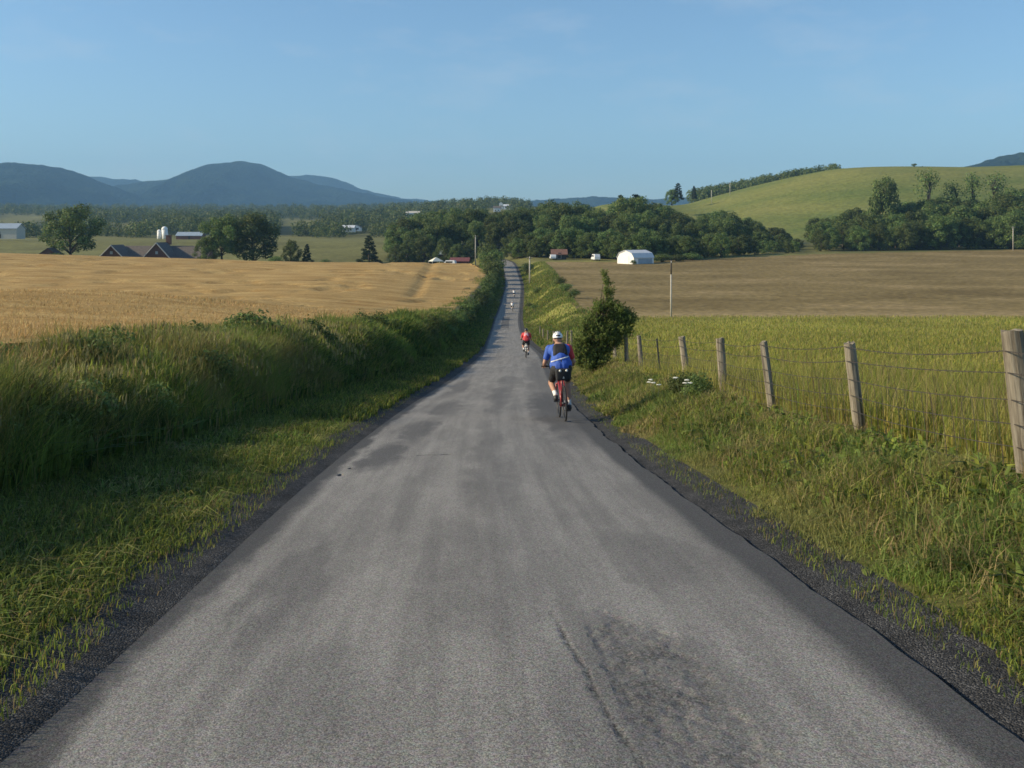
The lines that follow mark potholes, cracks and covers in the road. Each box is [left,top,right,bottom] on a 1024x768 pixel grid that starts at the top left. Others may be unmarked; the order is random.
crack [544,609,648,768]
crack [574,405,1019,739]
